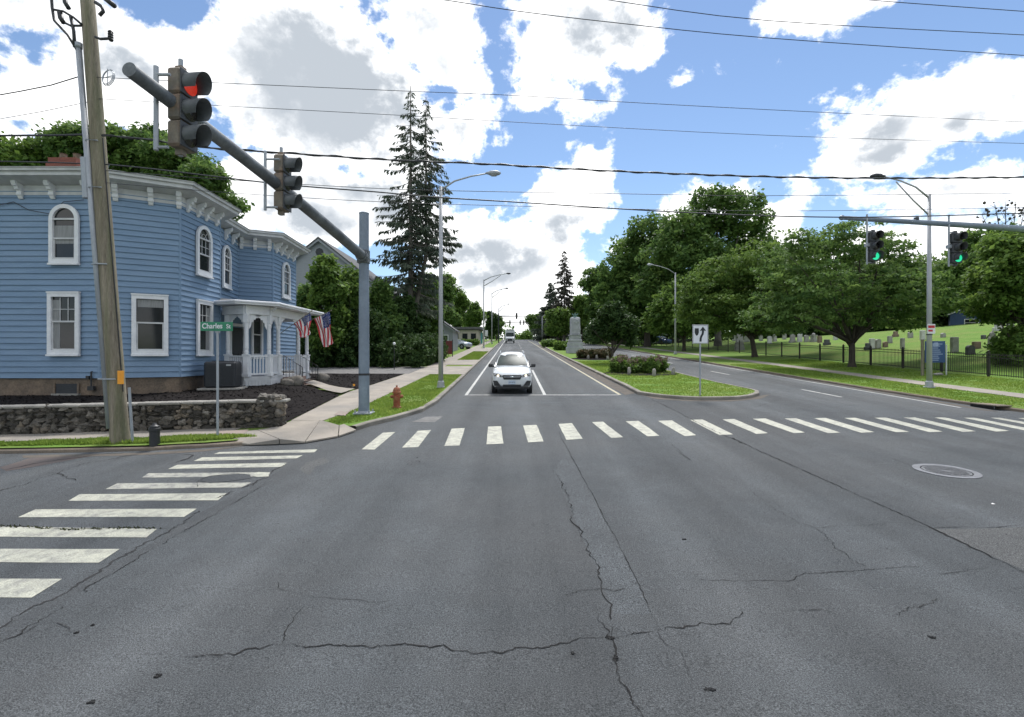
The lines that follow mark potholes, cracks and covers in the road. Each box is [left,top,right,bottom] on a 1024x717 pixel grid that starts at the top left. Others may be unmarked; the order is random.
crack [184,473,743,717]
crack [700,493,1020,581]
manhole cover [912,464,983,479]
